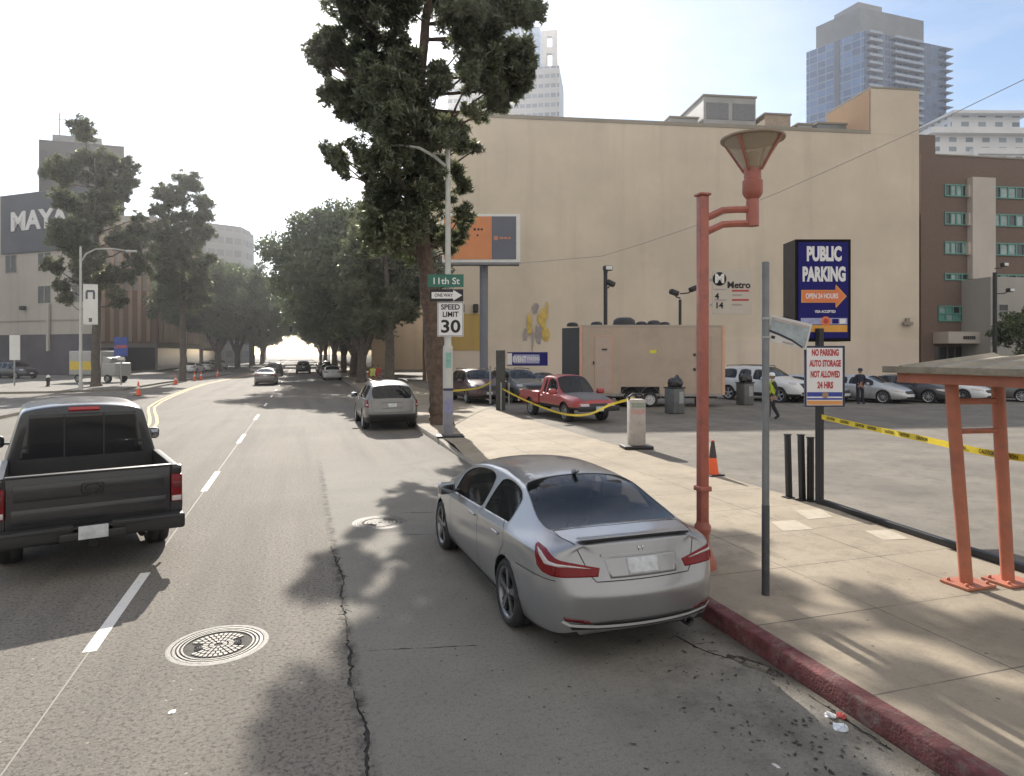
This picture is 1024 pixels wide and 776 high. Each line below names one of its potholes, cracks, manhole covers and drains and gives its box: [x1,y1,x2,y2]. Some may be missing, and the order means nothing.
manhole cover [165,625,269,666]
manhole cover [352,516,408,529]
crack [330,547,478,776]
crack [671,635,727,659]
